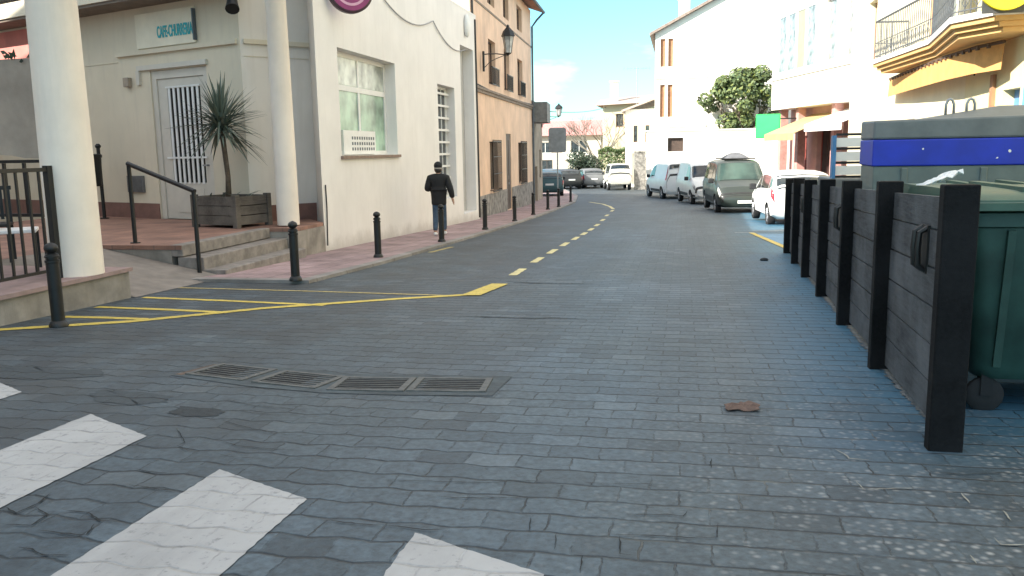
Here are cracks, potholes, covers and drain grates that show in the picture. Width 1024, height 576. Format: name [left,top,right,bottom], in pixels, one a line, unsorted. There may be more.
drain grate [406,377,493,392]
drain grate [251,370,345,389]
crack [7,492,109,555]
drain grate [326,376,417,392]
drain grate [185,363,278,381]
